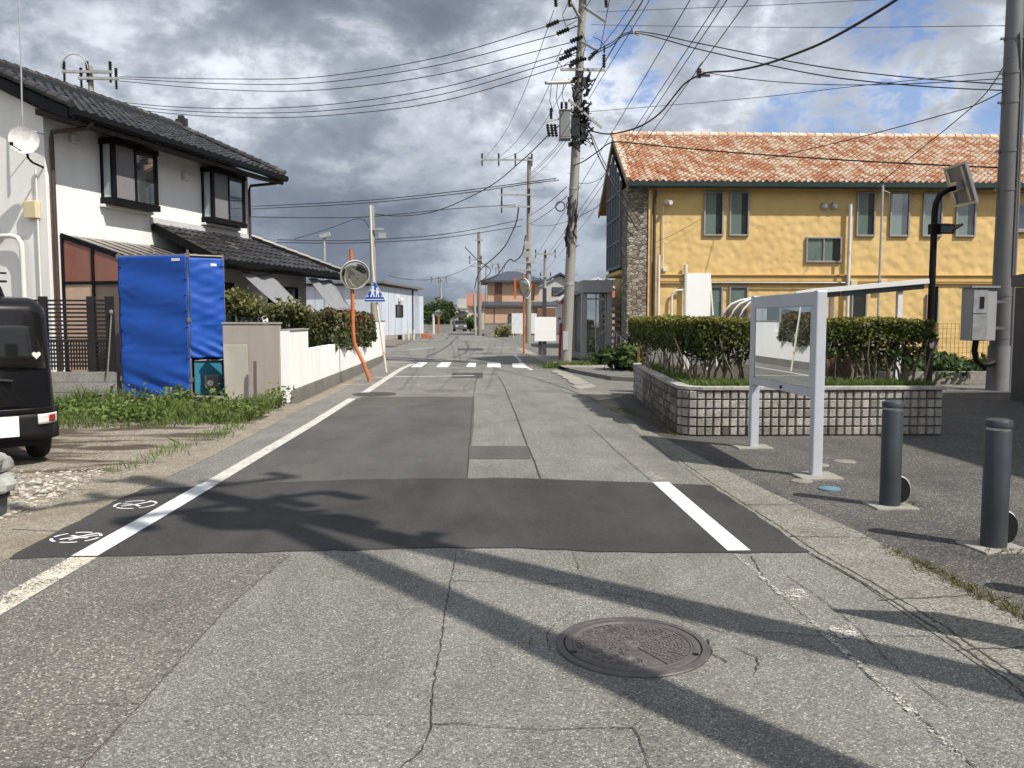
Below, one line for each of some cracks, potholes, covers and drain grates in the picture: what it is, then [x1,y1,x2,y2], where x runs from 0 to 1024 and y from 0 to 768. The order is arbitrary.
crack [401,554,976,768]
manhole cover [556,617,711,678]
